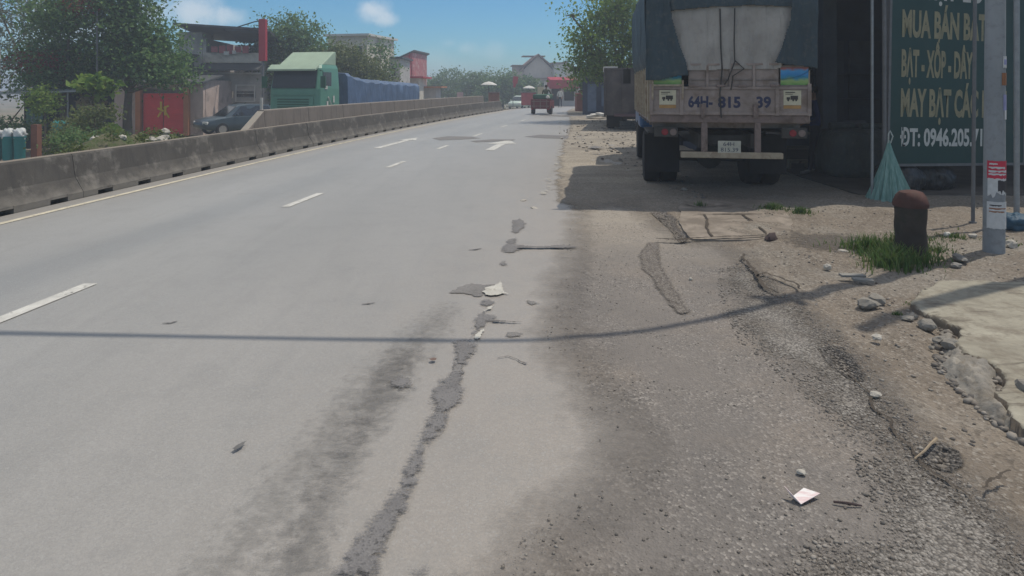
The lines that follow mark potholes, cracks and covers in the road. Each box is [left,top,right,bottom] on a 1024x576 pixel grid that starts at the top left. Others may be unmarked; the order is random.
pothole [511,218,526,233]
pothole [449,283,495,297]
pothole [919,442,964,472]
crack [740,254,801,293]
pothole [820,346,864,381]
pothole [502,243,522,253]
